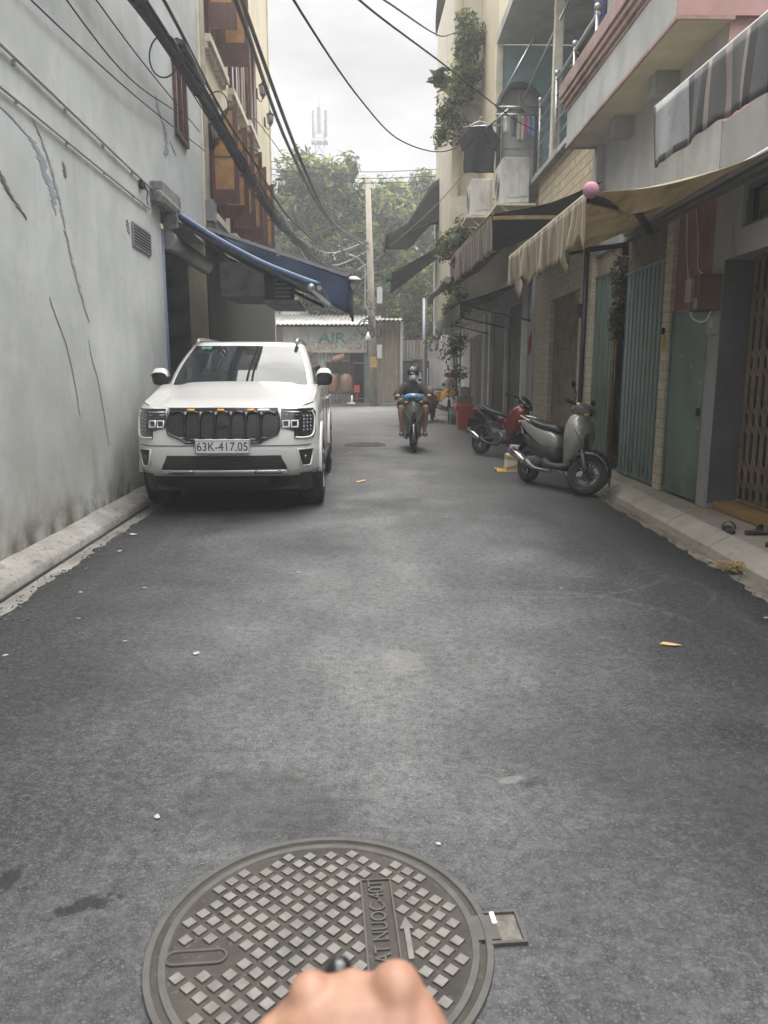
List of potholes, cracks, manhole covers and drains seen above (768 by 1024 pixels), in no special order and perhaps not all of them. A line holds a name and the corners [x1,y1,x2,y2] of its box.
manhole cover [142,837,528,1024]
